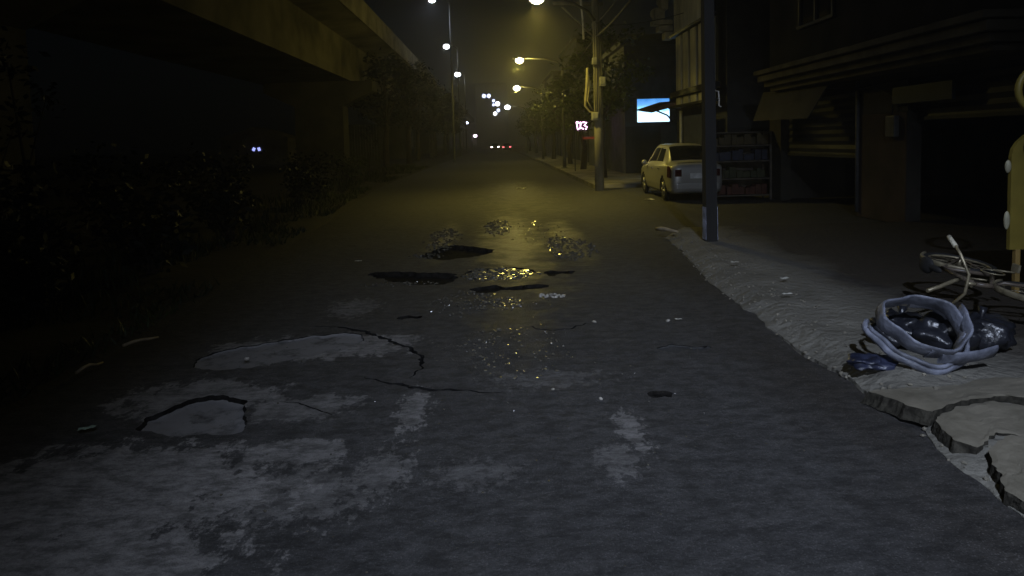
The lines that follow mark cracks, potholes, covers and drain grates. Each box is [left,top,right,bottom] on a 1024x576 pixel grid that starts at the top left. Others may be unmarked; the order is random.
crack [525,323,586,331]
pothole [470,284,549,293]
pothole [422,245,494,260]
crack [305,326,501,393]
pothole [368,271,458,285]
crack [286,402,332,415]
